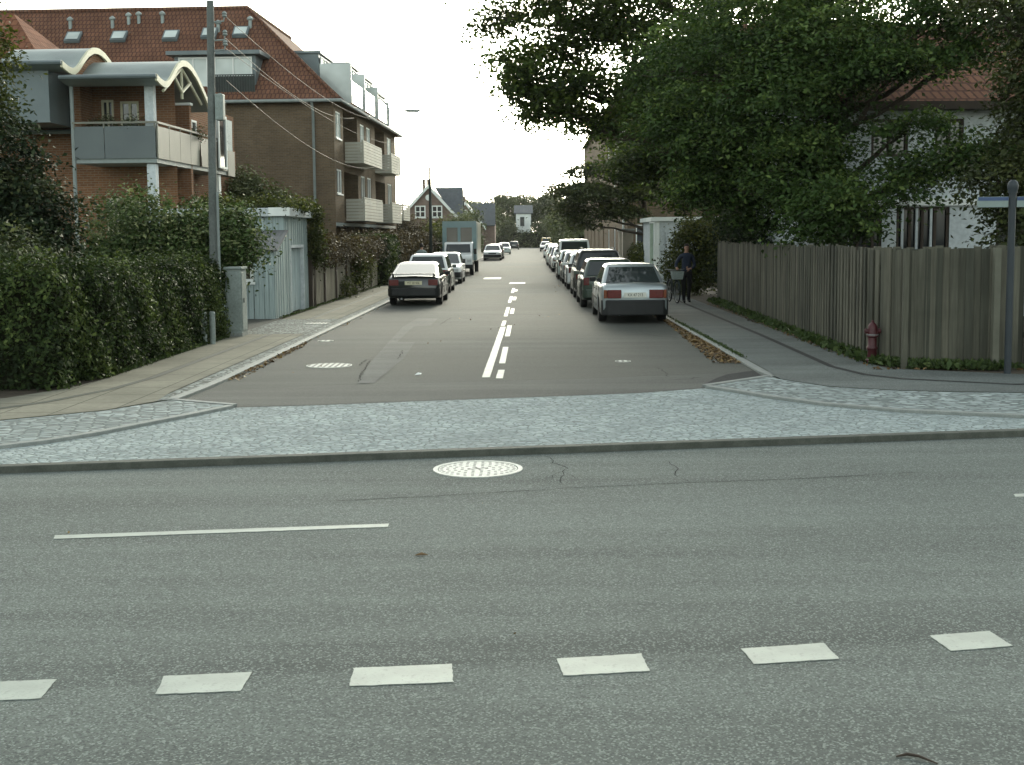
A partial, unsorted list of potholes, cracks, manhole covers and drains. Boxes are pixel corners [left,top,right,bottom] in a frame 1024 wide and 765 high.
manhole cover [433,460,523,478]
